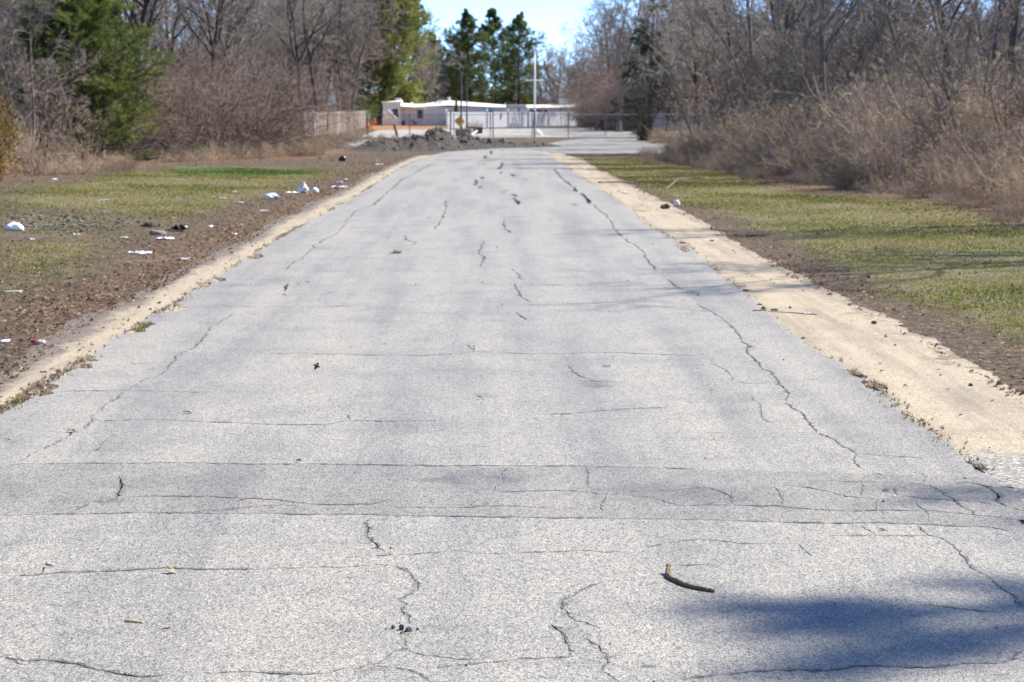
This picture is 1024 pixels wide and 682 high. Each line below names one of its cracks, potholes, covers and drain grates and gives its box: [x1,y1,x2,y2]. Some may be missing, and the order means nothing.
crack [207,163,432,287]
crack [552,169,573,187]
crack [7,205,1024,682]
